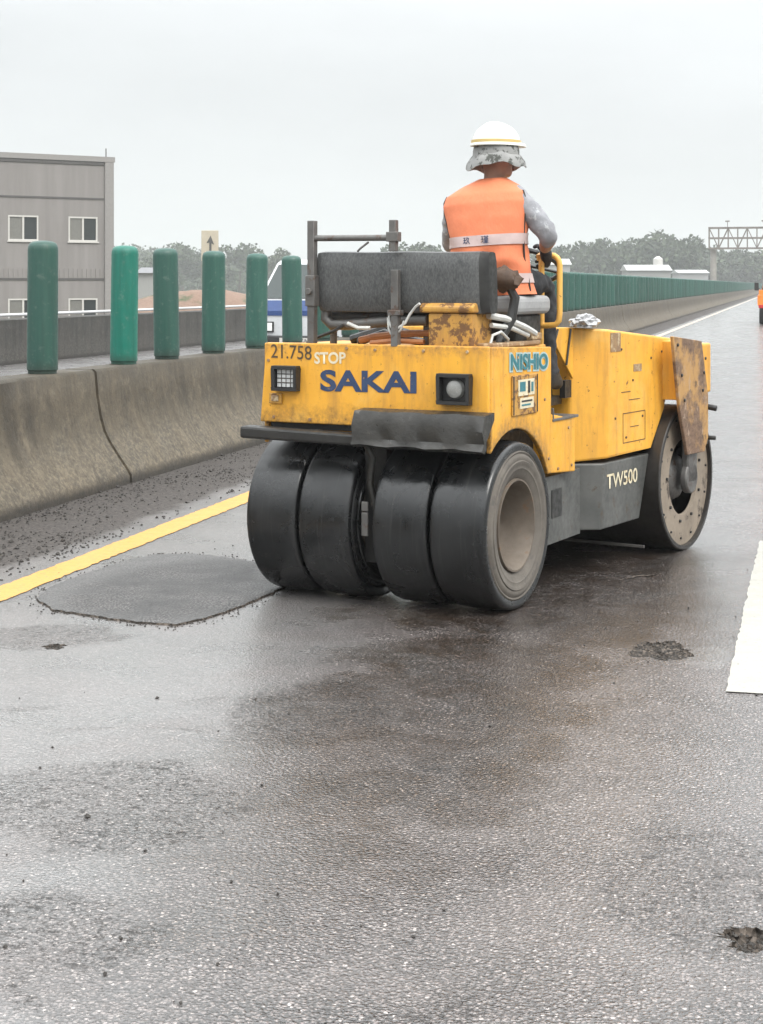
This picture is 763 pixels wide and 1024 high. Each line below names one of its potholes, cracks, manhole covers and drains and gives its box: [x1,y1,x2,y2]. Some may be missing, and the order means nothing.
pothole [711,927,763,954]
pothole [625,641,694,661]
